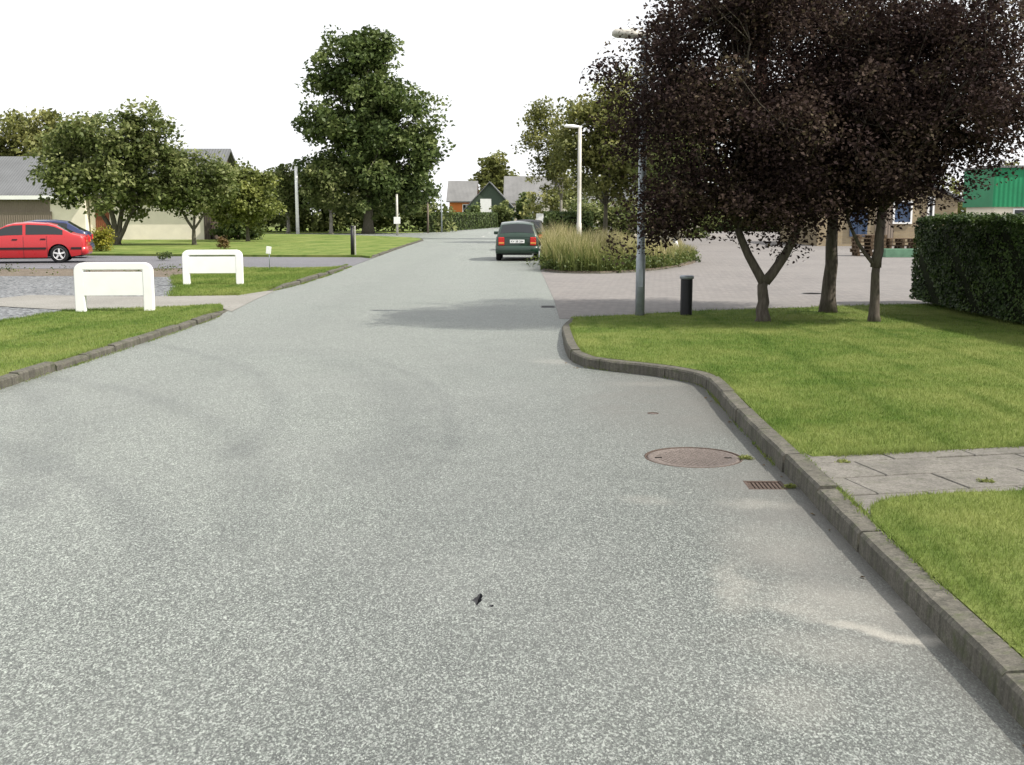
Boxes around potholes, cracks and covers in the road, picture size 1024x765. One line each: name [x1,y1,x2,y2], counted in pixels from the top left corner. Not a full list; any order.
drain grate [743,481,789,490]
manhole cover [644,447,743,468]
